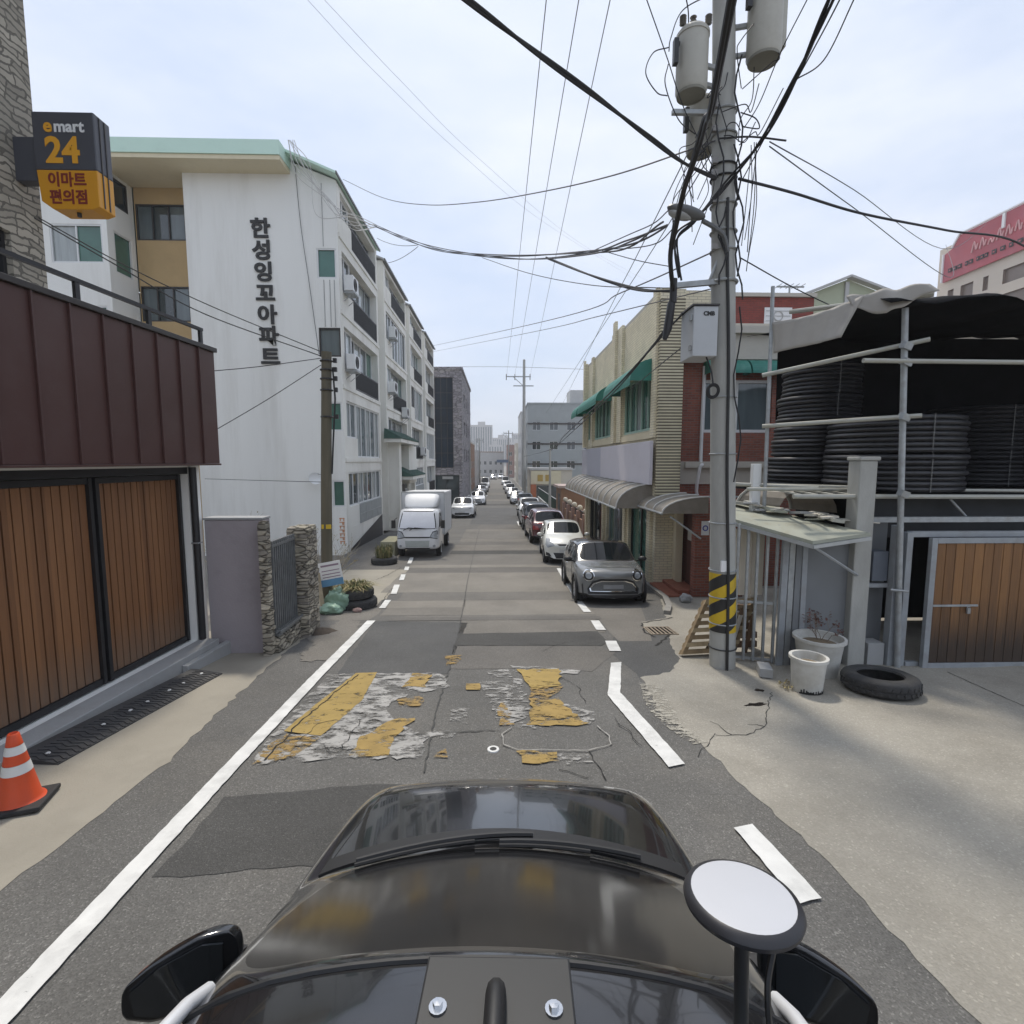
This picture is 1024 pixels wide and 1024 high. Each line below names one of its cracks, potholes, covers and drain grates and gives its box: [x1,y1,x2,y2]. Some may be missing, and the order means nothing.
crack [698,692,773,757]
crack [284,717,364,753]
drain grate [643,626,679,635]
crack [501,718,642,780]
